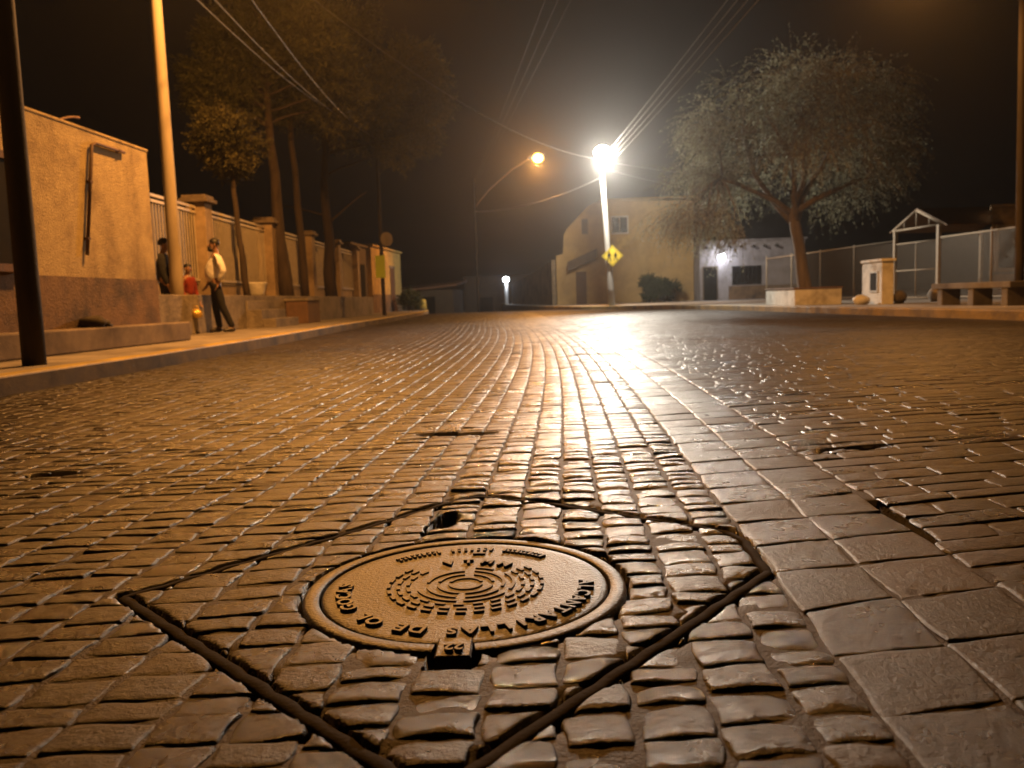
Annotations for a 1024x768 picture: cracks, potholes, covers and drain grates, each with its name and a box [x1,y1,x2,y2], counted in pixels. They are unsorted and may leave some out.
manhole cover [302,539,627,671]
pothole [433,517,457,529]
